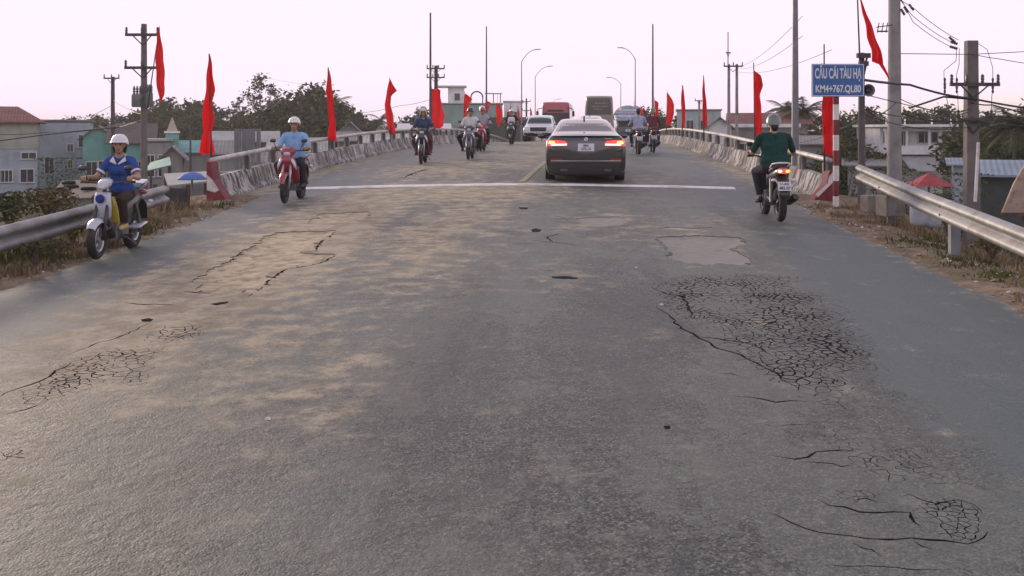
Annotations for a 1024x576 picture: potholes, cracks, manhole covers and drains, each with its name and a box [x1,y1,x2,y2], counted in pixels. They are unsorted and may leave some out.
crack [769,416,988,570]
crack [652,273,896,414]
